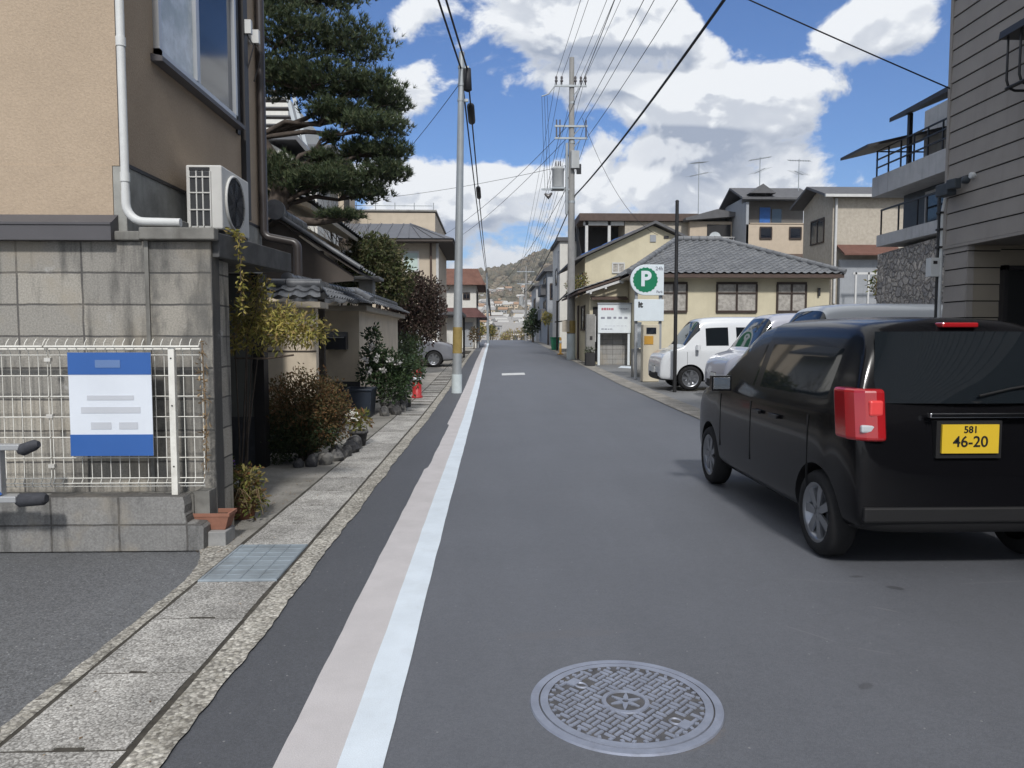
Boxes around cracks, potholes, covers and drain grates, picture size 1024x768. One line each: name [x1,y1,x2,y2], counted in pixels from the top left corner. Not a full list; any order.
manhole cover [530,660,725,757]
